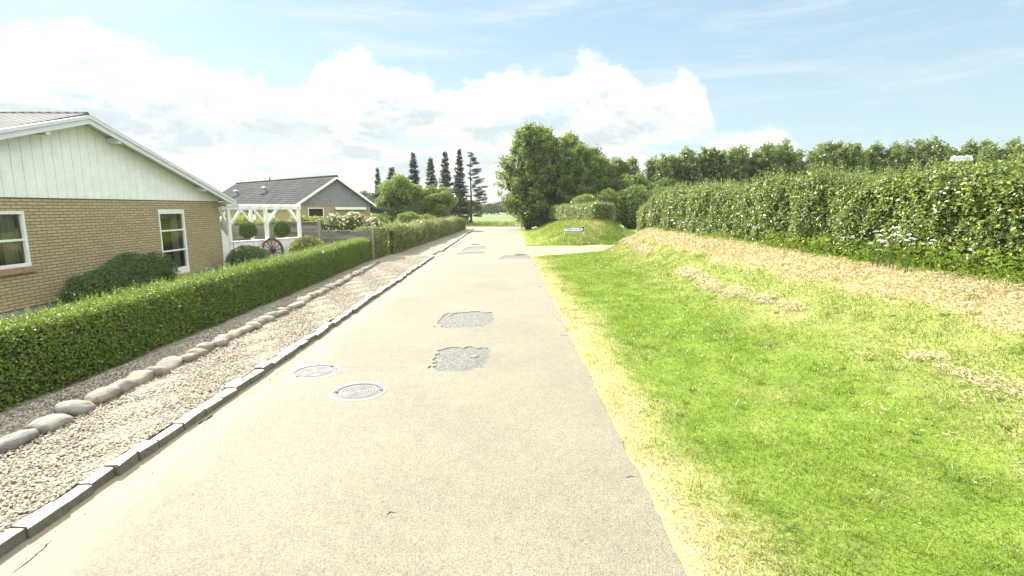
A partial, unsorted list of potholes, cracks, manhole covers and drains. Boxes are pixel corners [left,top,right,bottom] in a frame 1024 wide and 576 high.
crack [9,540,52,576]
manhole cover [289,364,341,379]
manhole cover [330,382,387,402]
